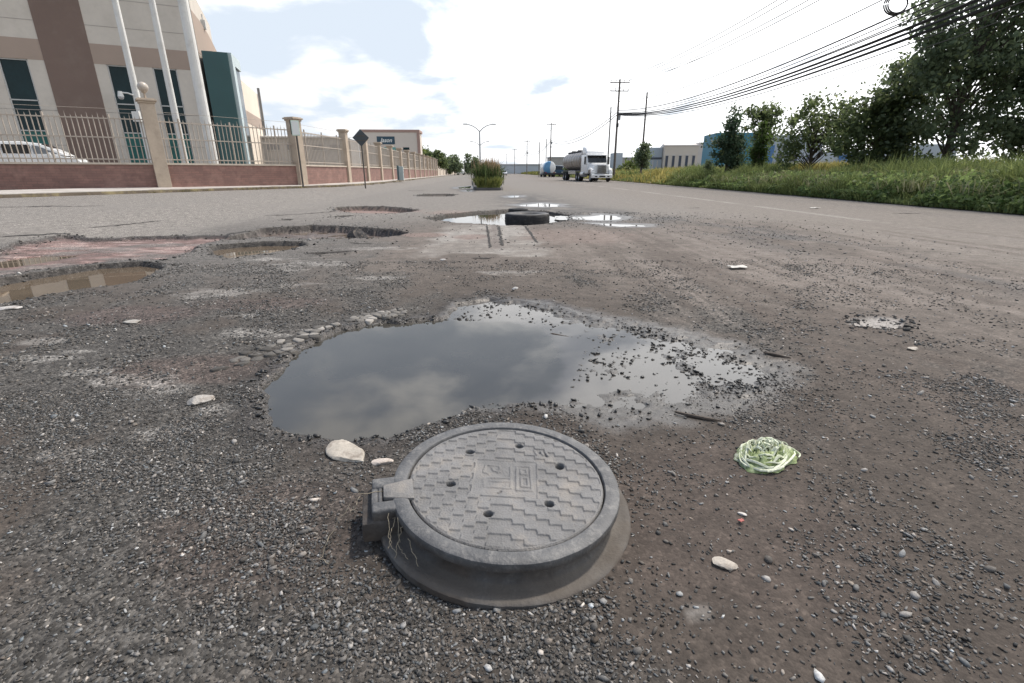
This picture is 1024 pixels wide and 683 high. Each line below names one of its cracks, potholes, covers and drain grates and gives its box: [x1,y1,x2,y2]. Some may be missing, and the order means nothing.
pothole [247,295,810,446]
pothole [843,314,912,330]
pothole [204,241,309,259]
pothole [218,224,409,241]
manhole cover [362,422,631,610]
pothole [0,260,168,304]
pothole [334,206,420,214]
pothole [423,209,570,226]
